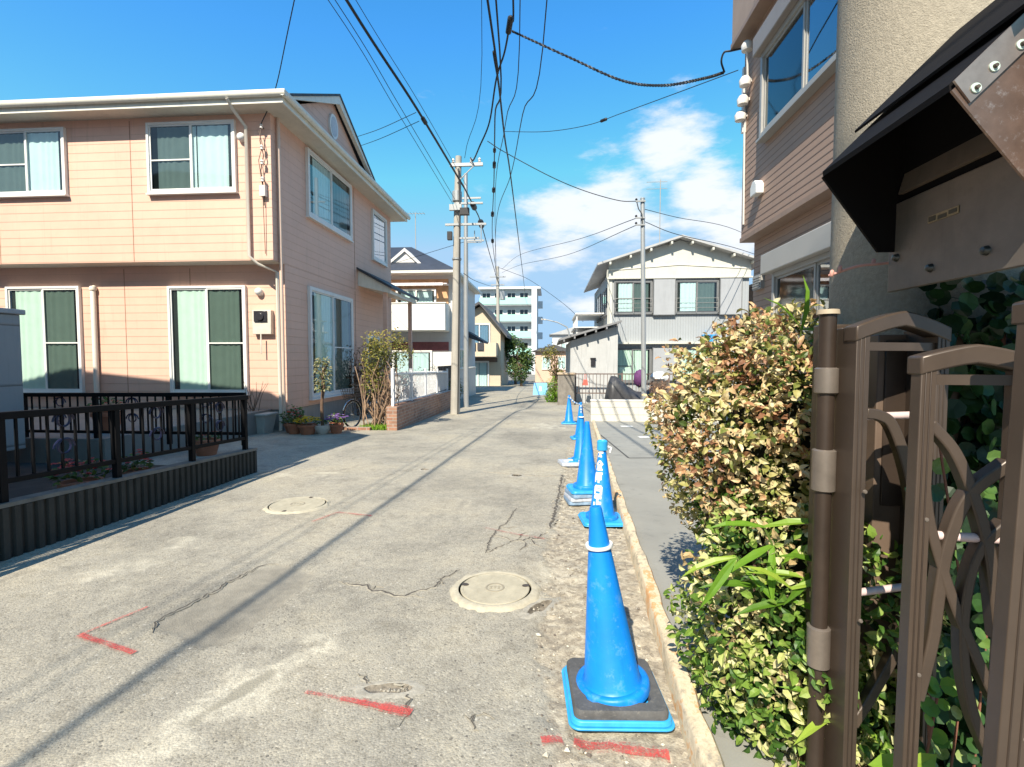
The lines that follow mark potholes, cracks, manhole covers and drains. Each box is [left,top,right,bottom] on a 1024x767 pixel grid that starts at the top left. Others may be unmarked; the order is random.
pothole [519,597,561,619]
crack [483,471,565,553]
crack [151,563,279,633]
pothole [350,679,426,699]
manhole cover [449,570,542,613]
crack [338,569,460,598]
manhole cover [262,496,331,514]
